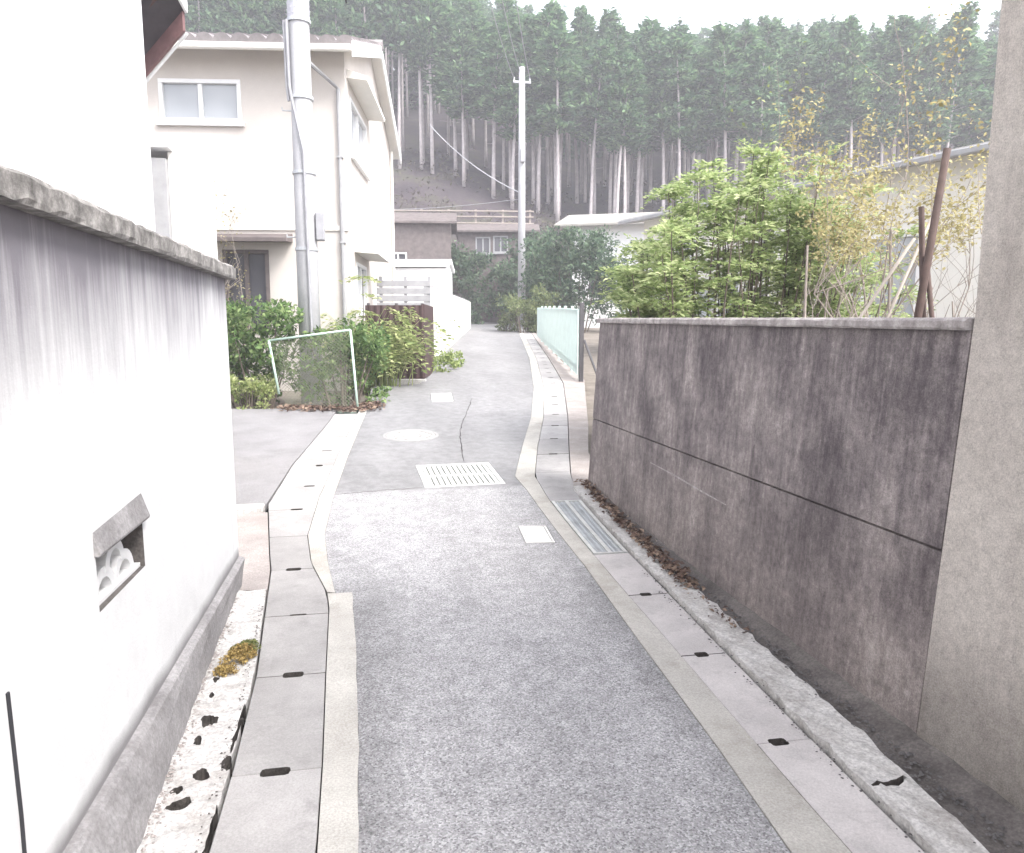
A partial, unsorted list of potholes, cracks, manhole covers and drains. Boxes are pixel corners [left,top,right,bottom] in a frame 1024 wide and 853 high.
manhole cover [383,429,439,442]
utility cover [518,526,555,543]
drain grate [416,462,506,488]
drain grate [551,500,628,555]
crack [459,399,472,461]
utility cover [431,393,454,402]
